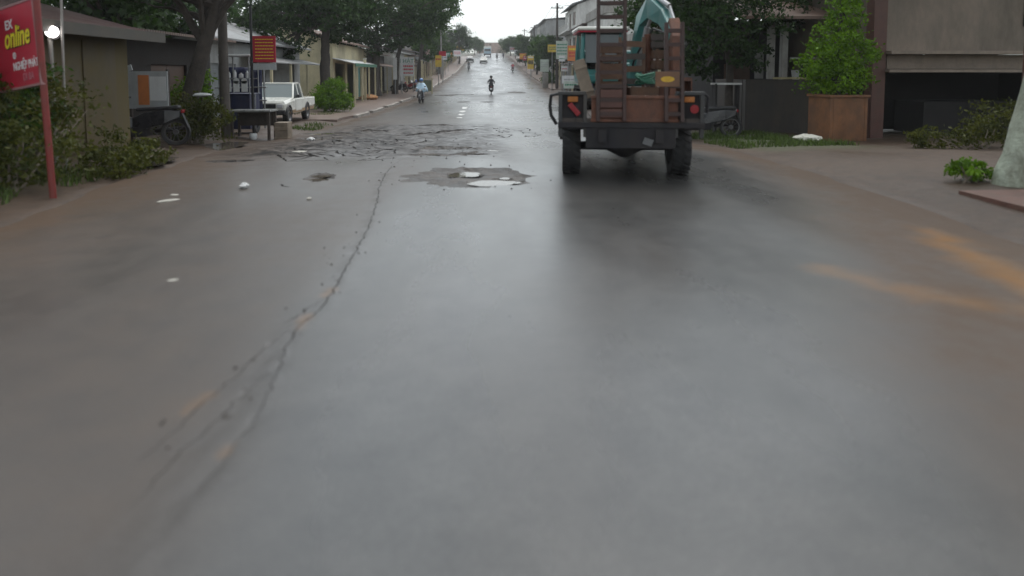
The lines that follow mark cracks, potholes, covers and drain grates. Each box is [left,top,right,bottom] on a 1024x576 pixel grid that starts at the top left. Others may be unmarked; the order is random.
crack [276,138,427,161]
crack [492,128,541,138]
pothole [399,167,535,188]
pothole [304,172,336,182]
